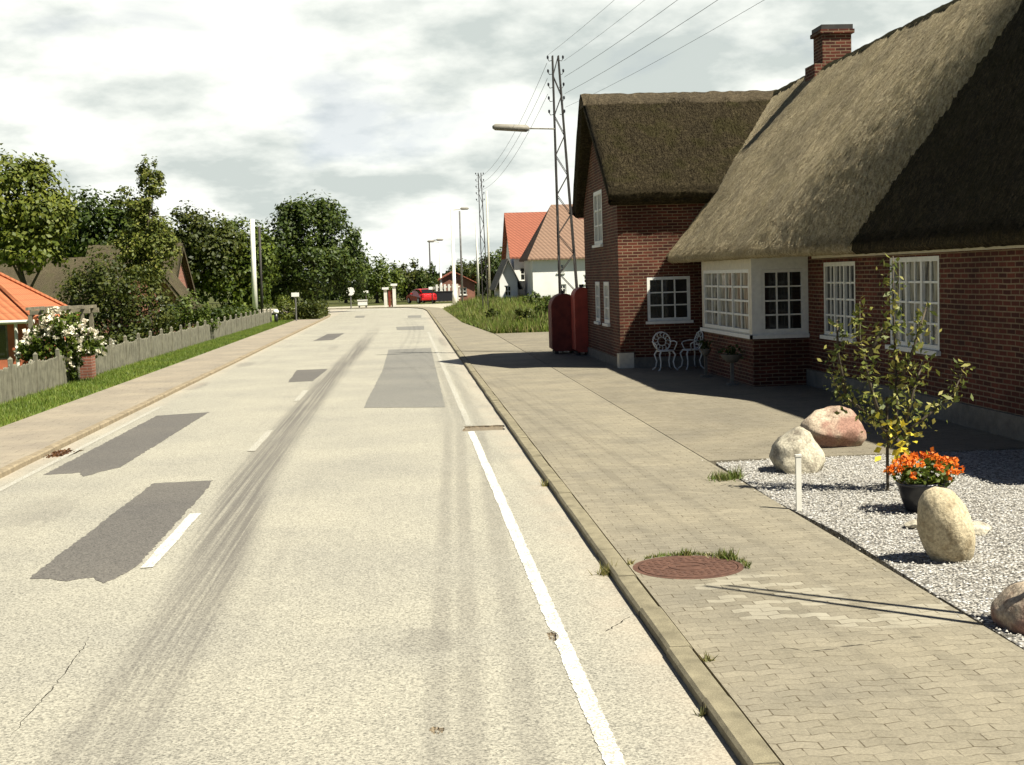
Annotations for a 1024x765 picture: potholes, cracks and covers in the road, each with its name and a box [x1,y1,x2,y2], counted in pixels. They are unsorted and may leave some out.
crack [13,637,89,732]
manhole cover [633,555,744,579]
